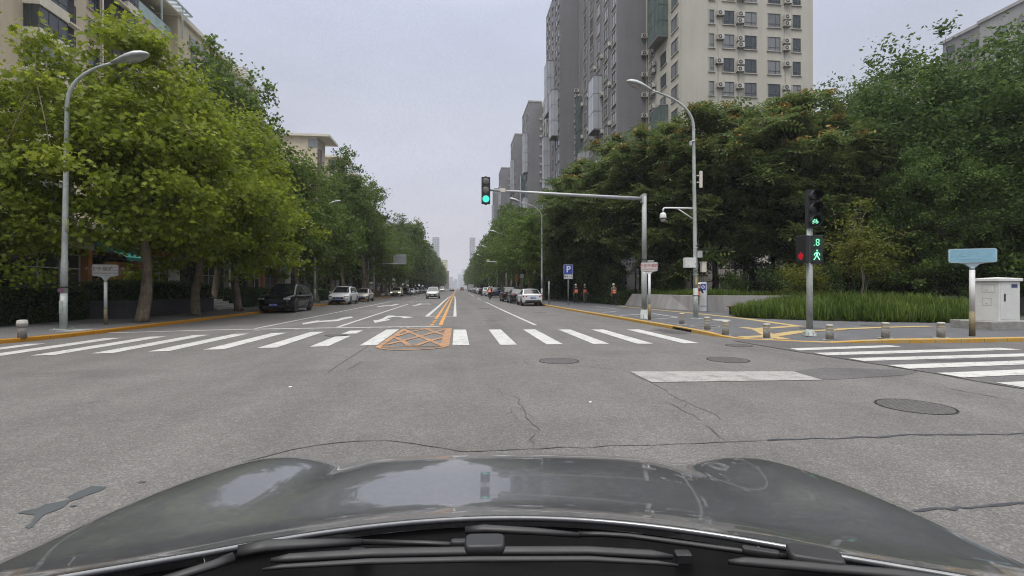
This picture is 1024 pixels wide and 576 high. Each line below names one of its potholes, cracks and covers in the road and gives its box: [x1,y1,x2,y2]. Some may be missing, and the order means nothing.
manhole cover [874,399,960,415]
crack [241,359,763,463]
